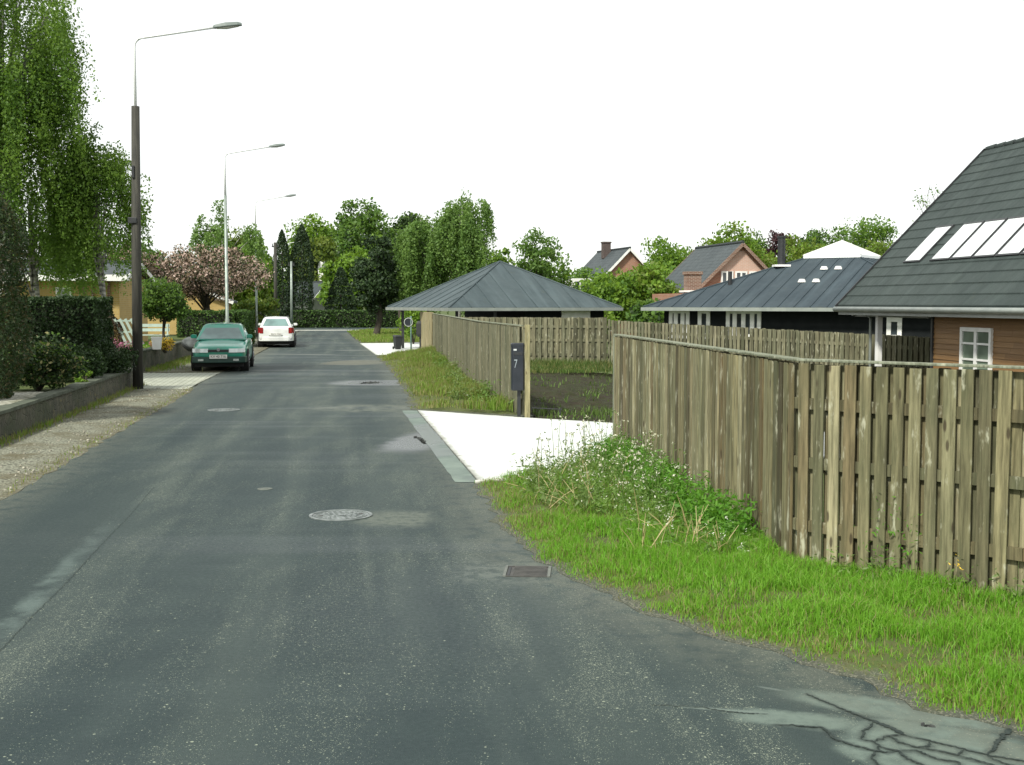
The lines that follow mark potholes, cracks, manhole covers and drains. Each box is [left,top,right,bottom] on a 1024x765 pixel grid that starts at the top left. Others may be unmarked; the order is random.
manhole cover [309,509,373,521]
crack [653,693,1024,765]
drain grate [503,565,551,577]
